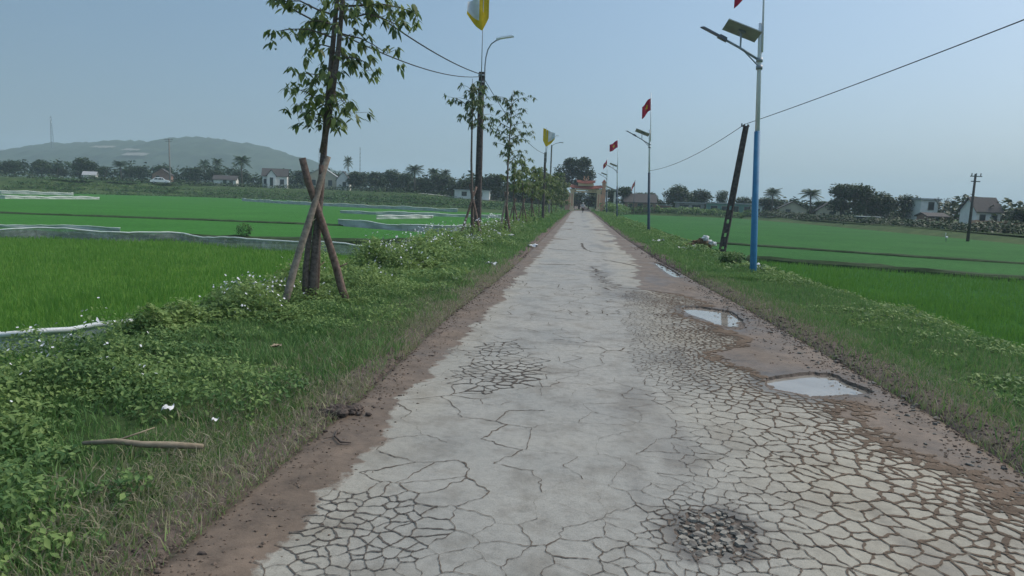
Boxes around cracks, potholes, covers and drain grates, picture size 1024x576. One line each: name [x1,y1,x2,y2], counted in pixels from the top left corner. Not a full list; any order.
pothole [654,262,680,277]
crack [549,233,1024,576]
crack [254,283,678,576]
pothole [681,306,746,330]
pothole [765,372,873,399]
pothole [673,510,758,560]
